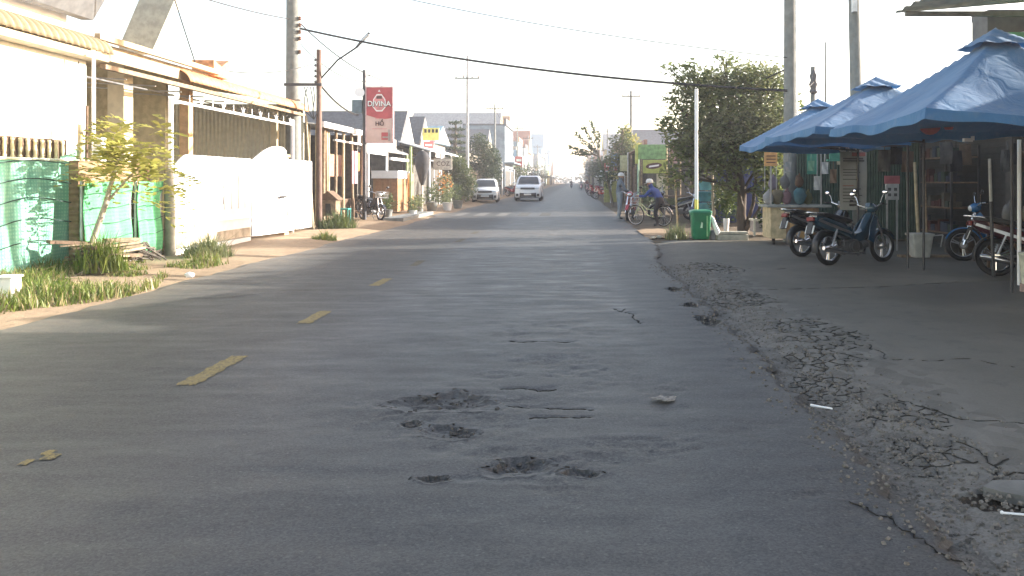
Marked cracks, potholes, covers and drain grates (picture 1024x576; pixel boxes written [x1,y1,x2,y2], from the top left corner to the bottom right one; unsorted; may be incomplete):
pothole [946,488,1024,514]
pothole [396,419,426,430]
pothole [692,315,726,327]
pothole [477,454,559,480]
crack [508,388,591,419]
crack [849,501,966,565]
pothole [408,474,456,486]
crack [684,262,1024,481]
pothole [555,466,606,480]
pothole [378,389,504,414]
pothole [418,423,484,443]
